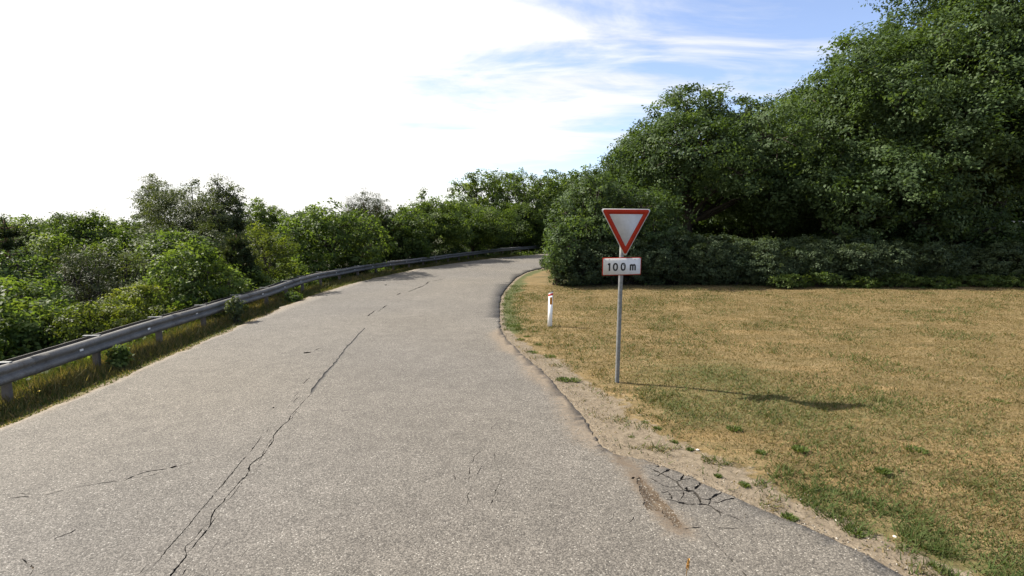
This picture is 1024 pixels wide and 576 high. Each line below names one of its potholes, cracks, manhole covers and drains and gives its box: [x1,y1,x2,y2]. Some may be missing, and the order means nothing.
crack [139,379,311,576]
crack [453,426,502,504]
crack [650,466,747,576]
crack [14,461,198,498]
pothole [637,477,682,529]
